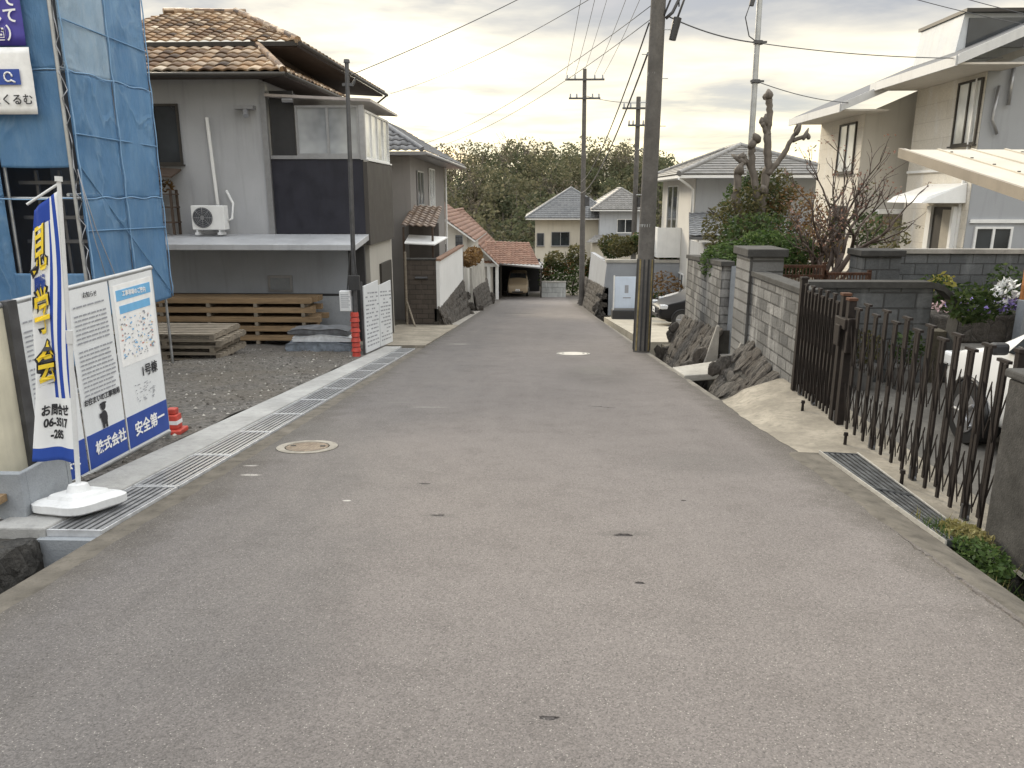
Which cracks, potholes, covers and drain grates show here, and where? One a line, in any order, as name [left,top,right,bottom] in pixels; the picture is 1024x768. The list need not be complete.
drain grate [239,413,303,434]
drain grate [358,364,389,372]
drain grate [302,388,347,401]
drain grate [46,486,178,537]
drain grate [133,454,232,489]
drain grate [195,431,272,457]
drain grate [274,399,327,415]
crack [890,528,1024,626]
manhole cover [276,440,338,454]
drain grate [342,370,377,380]
drain grate [823,452,912,495]
drain grate [323,378,363,389]
